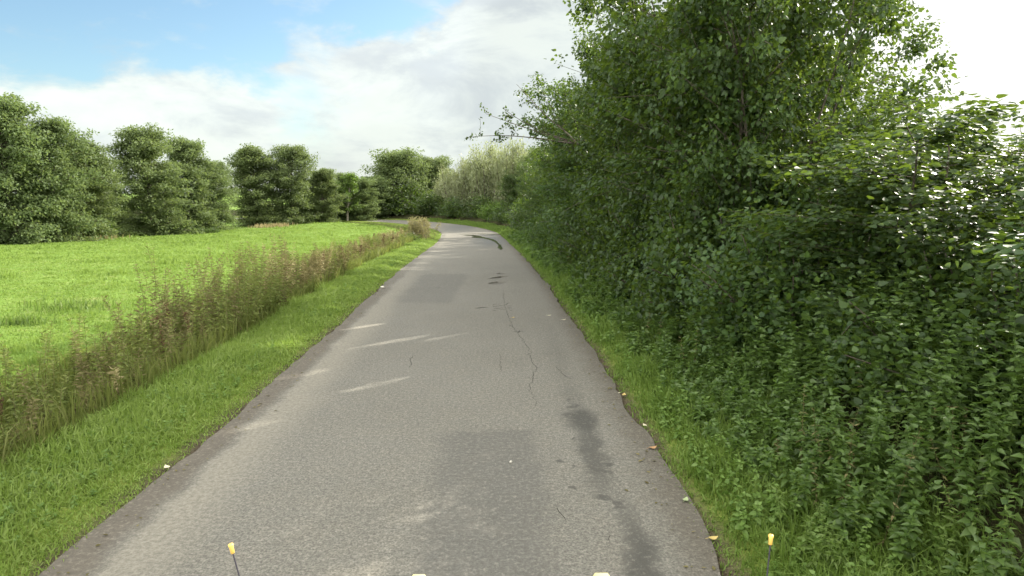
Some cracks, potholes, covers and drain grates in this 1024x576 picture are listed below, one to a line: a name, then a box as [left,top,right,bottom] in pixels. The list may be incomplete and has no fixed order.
crack [480,292,540,416]
